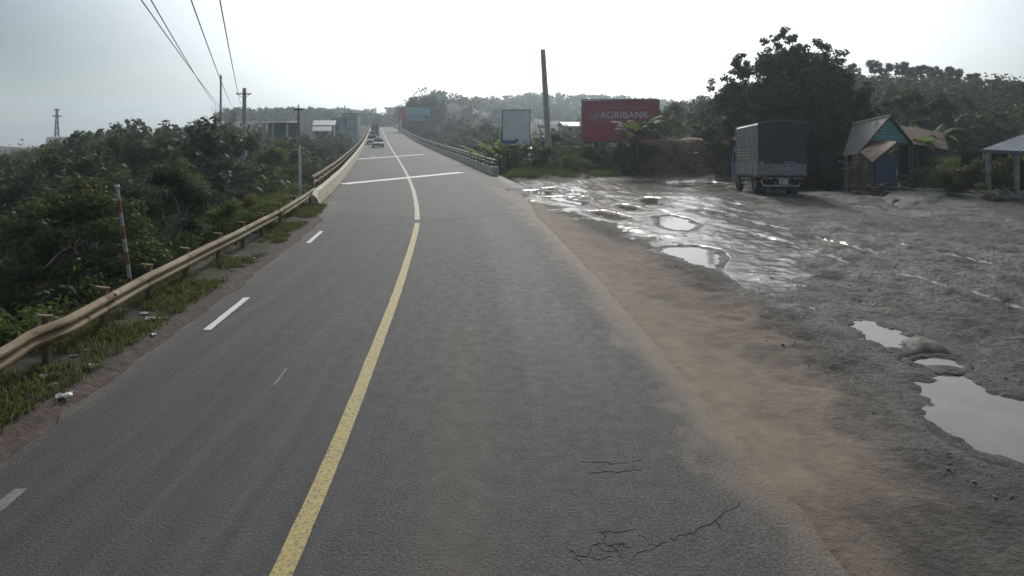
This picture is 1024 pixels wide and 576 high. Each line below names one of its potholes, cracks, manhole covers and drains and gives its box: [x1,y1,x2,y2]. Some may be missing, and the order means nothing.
pothole [901,353,975,376]
crack [569,502,741,562]
pothole [648,245,730,270]
pothole [898,365,1024,470]
pothole [835,316,920,353]
pothole [650,214,705,231]
pothole [634,197,664,205]
